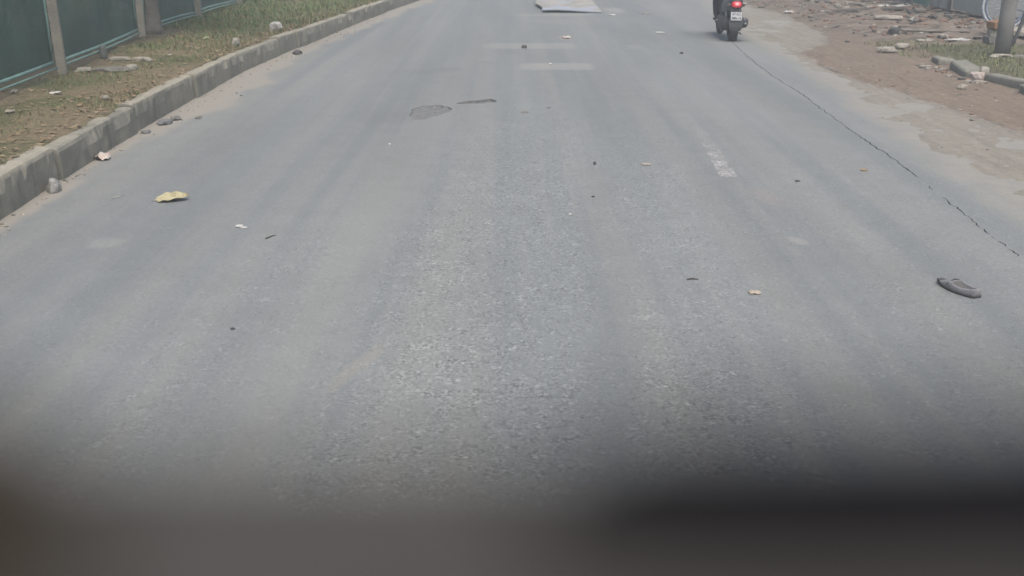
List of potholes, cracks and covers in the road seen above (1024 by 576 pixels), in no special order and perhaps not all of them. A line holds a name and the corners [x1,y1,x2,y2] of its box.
crack [733,42,1019,256]
pothole [409,105,452,120]
